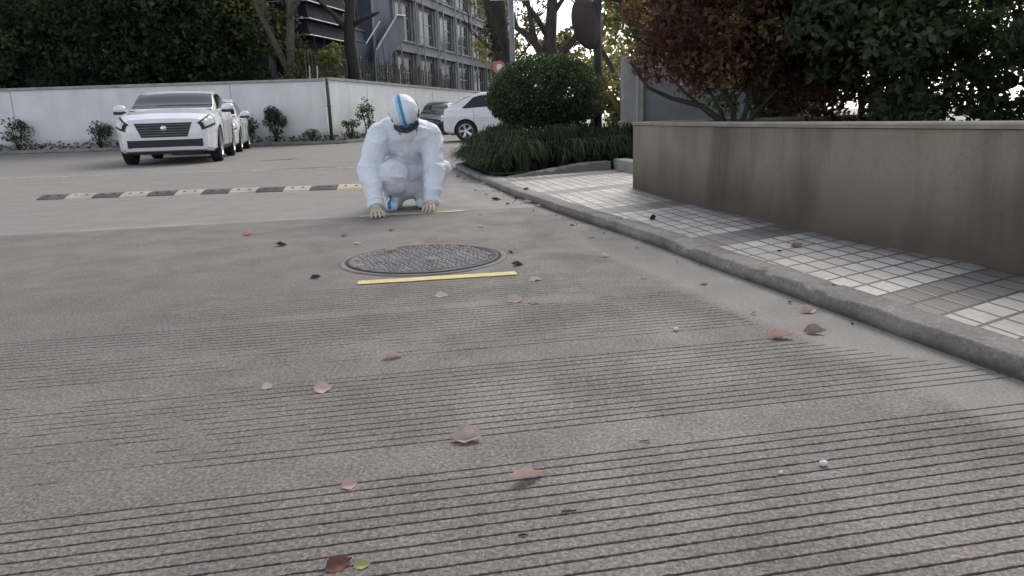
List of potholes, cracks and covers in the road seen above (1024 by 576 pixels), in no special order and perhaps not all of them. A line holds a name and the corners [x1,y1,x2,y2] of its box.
manhole cover [339,244,507,277]
